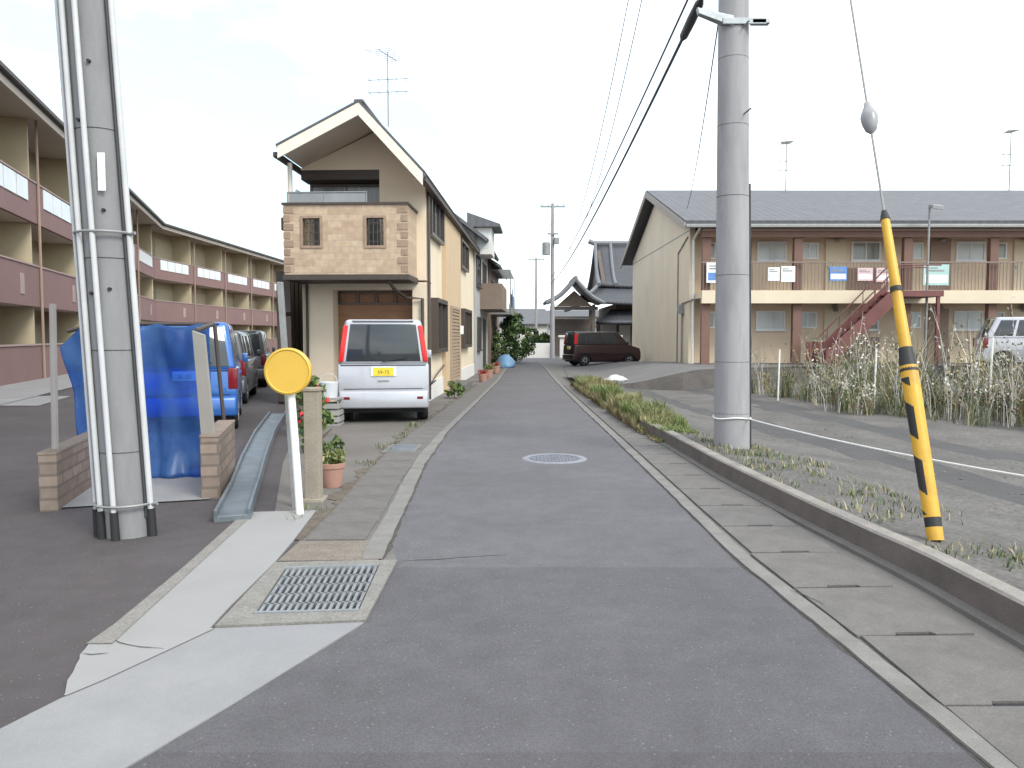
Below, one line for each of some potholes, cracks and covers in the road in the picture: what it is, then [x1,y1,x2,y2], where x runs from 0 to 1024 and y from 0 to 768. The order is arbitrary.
drain grate [215,560,397,628]
manhole cover [522,453,587,464]
